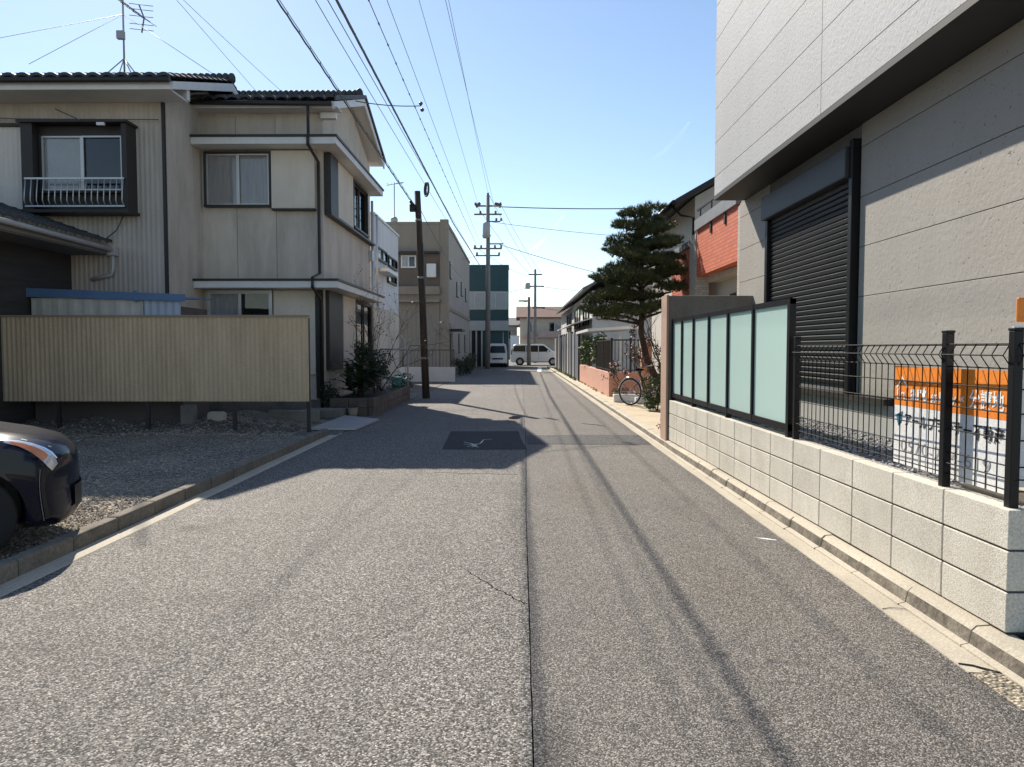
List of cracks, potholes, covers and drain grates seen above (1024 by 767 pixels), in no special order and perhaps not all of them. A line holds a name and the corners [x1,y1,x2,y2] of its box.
crack [453,381,534,767]
